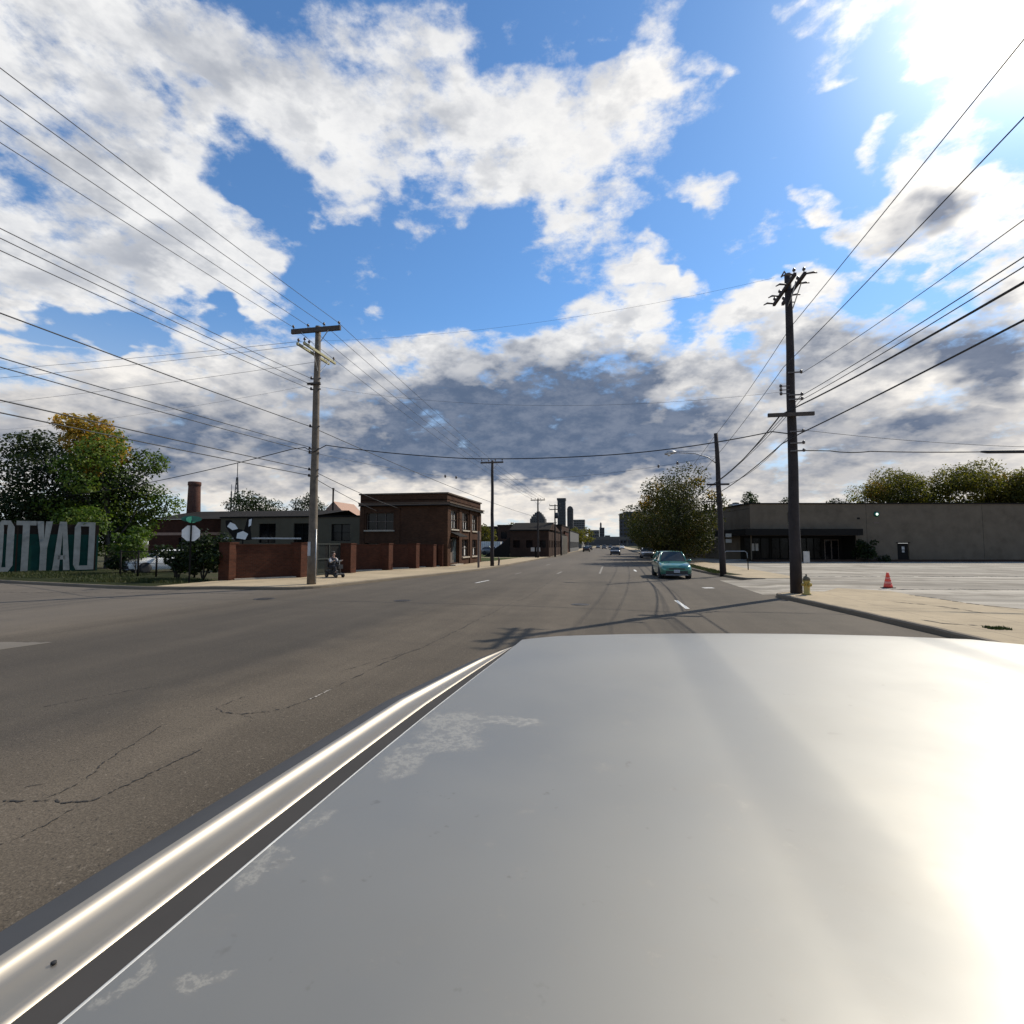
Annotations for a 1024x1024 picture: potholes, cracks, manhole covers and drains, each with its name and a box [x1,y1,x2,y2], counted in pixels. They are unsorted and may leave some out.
crack [216,585,545,721]
crack [1,726,201,844]
